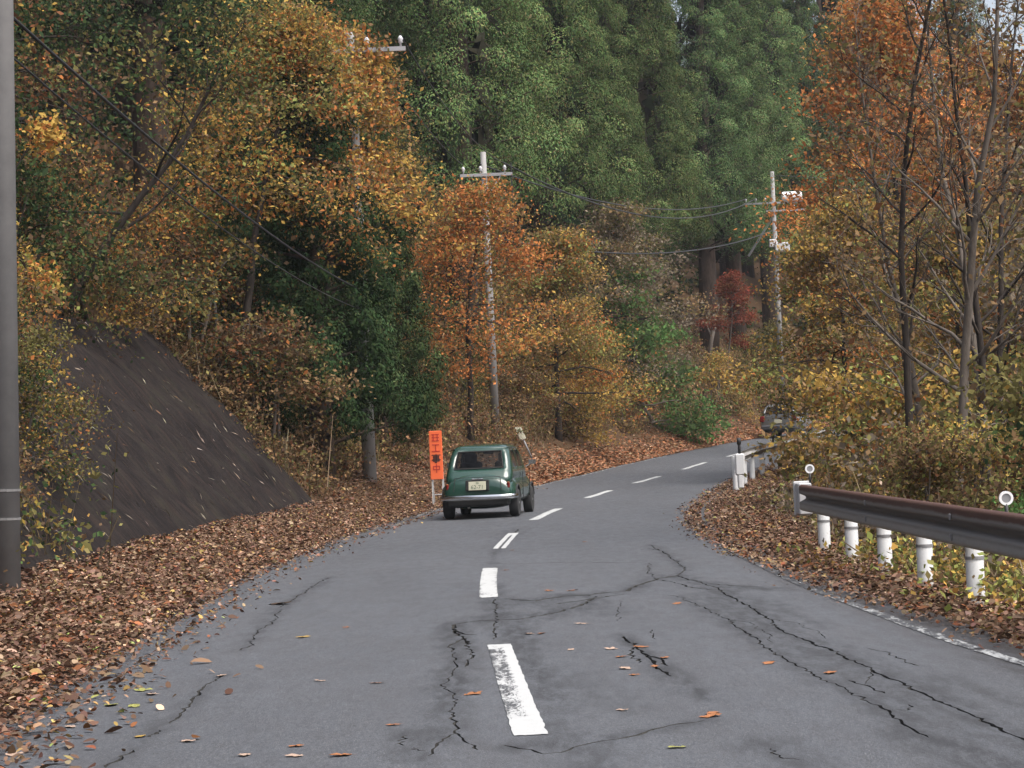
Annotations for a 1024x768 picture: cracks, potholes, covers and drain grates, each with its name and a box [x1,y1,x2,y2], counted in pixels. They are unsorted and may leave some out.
crack [458,546,1024,740]
crack [505,721,700,754]
crack [104,675,225,768]
crack [397,624,478,756]
